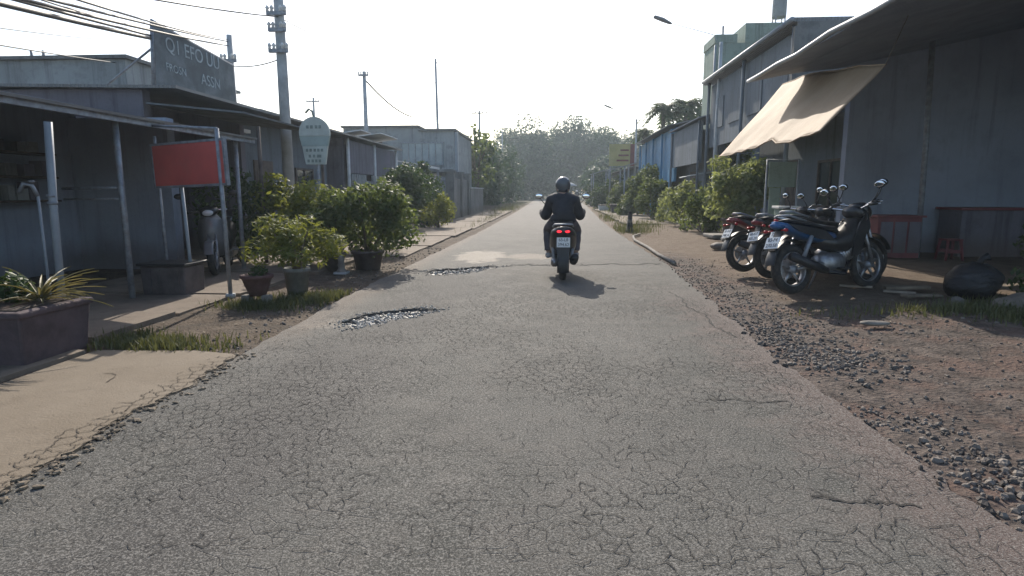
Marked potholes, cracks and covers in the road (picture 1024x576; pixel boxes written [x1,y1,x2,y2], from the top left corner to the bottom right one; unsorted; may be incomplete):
crack [0,270,1024,576]
pothole [418,264,507,277]
pothole [329,305,450,331]
